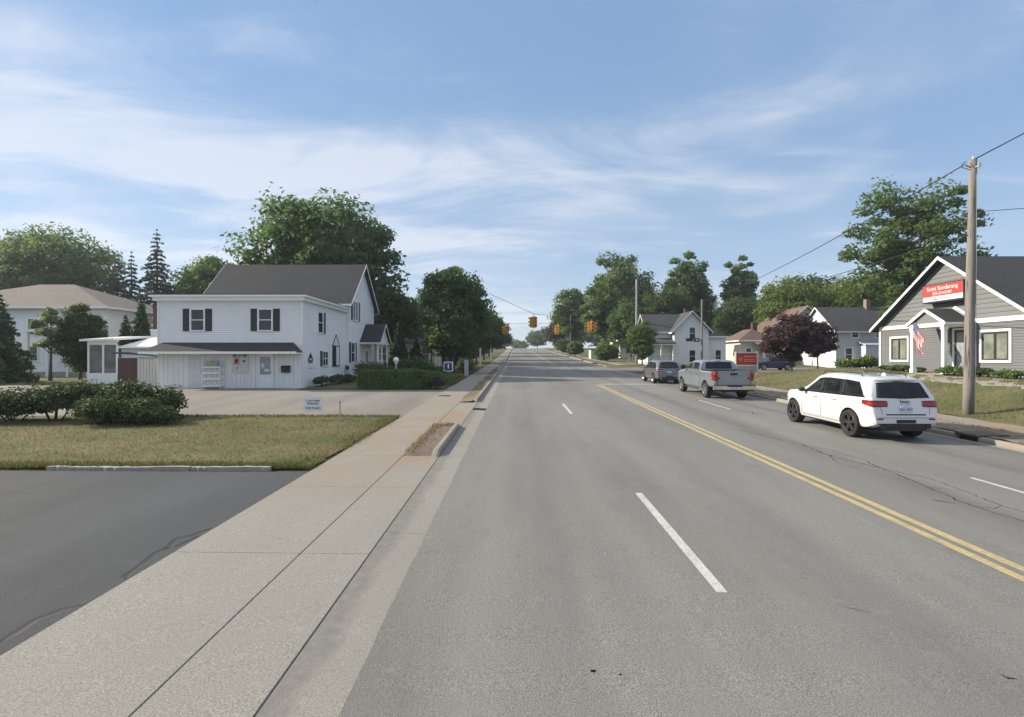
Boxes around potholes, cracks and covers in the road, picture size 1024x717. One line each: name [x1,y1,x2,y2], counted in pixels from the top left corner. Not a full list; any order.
drain grate [955,431,1010,442]
crack [742,430,1022,521]
